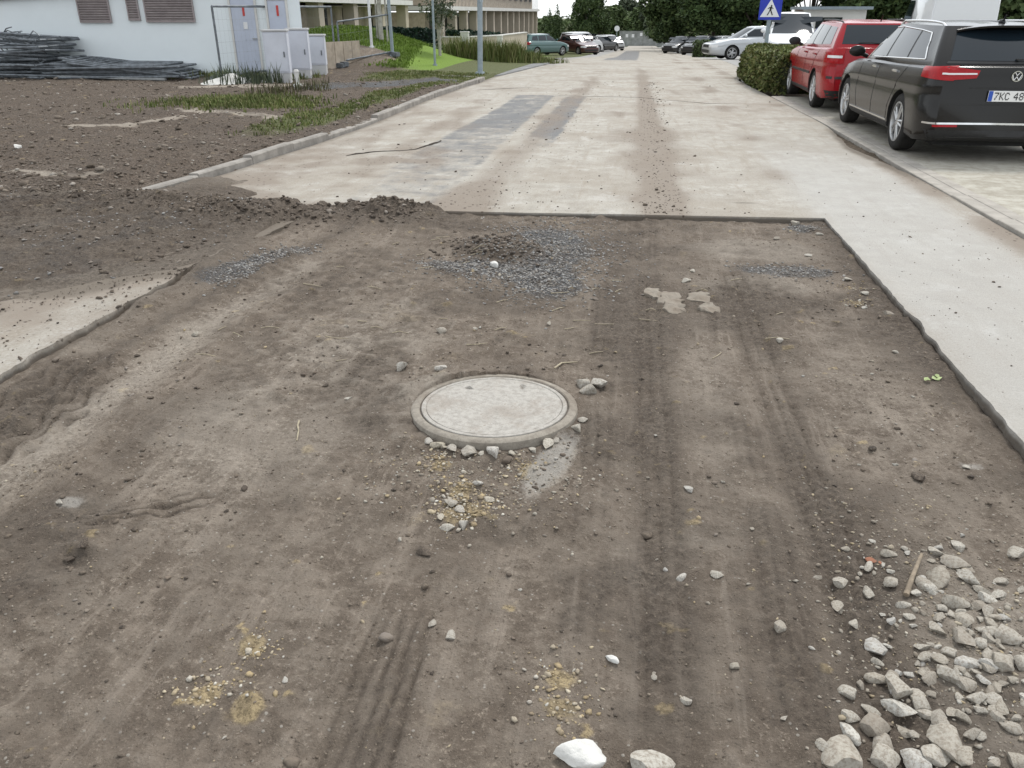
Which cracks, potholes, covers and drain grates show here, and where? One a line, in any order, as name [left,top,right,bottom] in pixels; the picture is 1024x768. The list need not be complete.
manhole cover [411,374,578,451]
crack [346,140,441,156]
